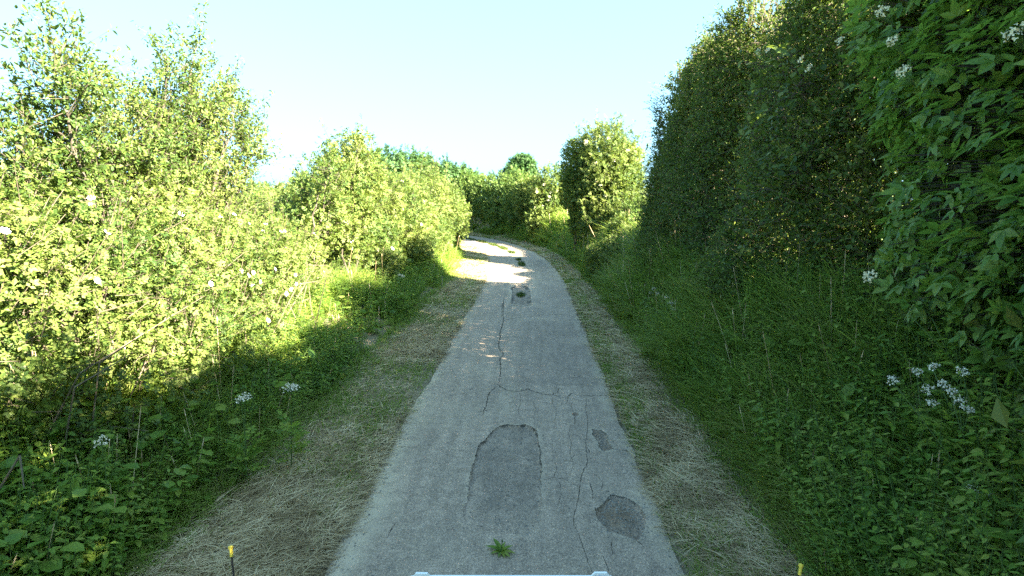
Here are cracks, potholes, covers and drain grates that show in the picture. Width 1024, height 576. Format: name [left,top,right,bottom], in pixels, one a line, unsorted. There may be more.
crack [480,299,628,571]
pothole [510,285,532,306]
